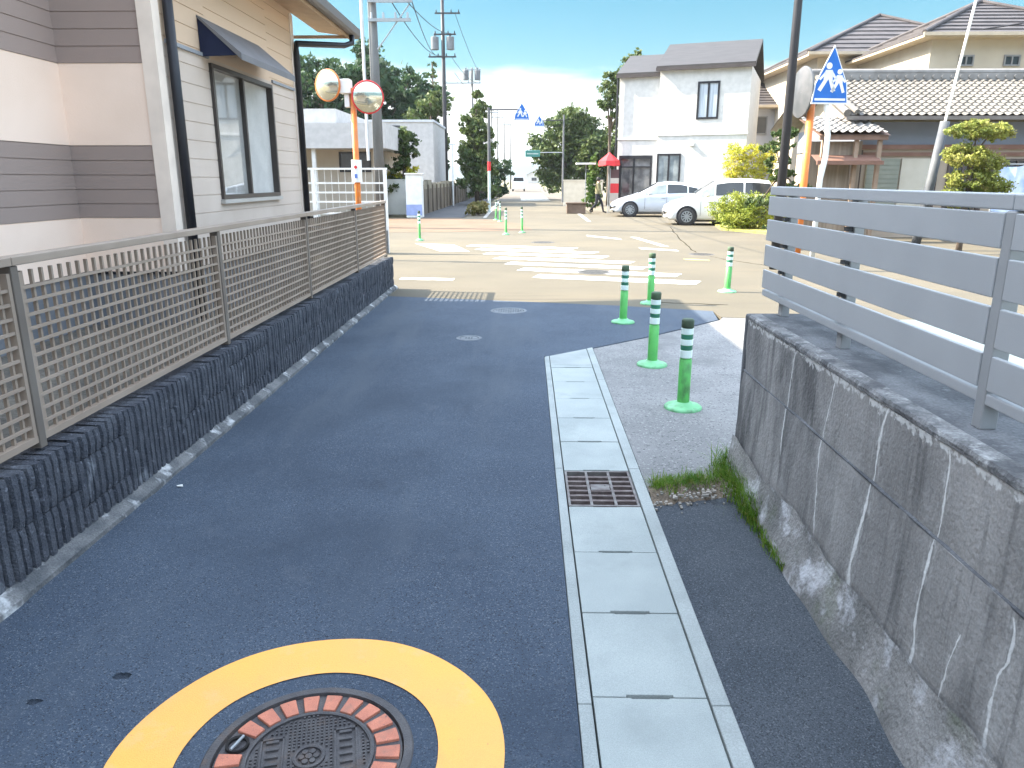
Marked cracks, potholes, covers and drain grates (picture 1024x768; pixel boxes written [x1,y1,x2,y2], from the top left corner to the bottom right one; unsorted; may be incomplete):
drain grate [564,471,640,514]
manhole cover [199,688,414,768]
